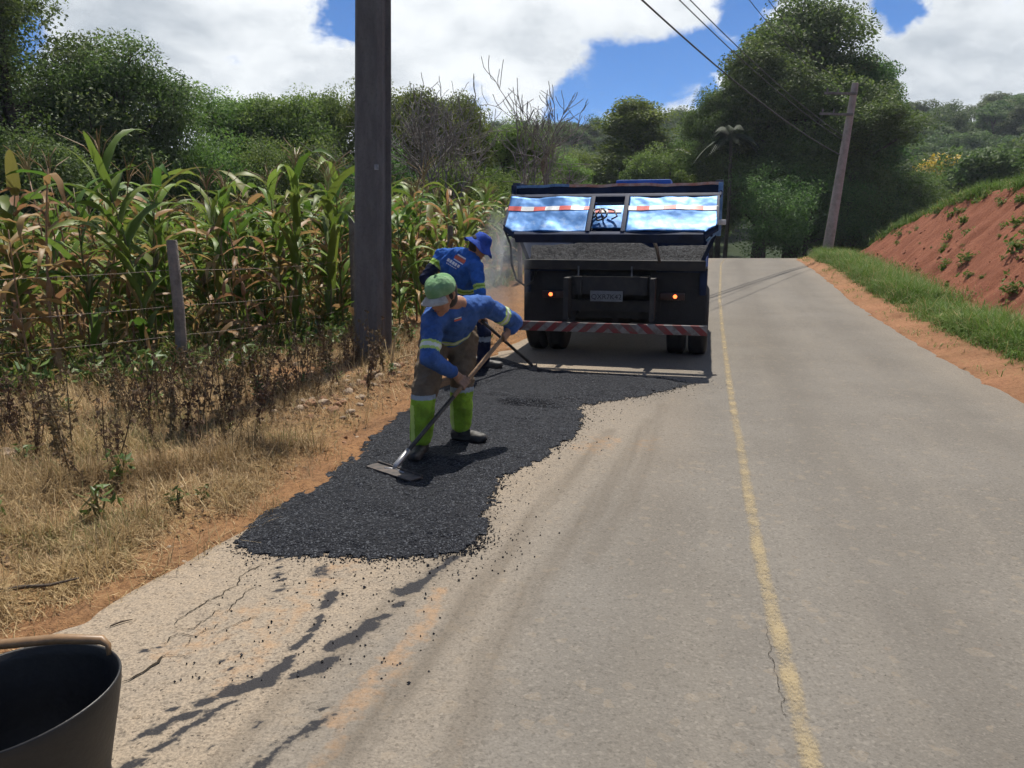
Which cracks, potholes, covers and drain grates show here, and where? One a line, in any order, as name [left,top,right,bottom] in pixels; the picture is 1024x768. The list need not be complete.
crack [124,564,266,681]
